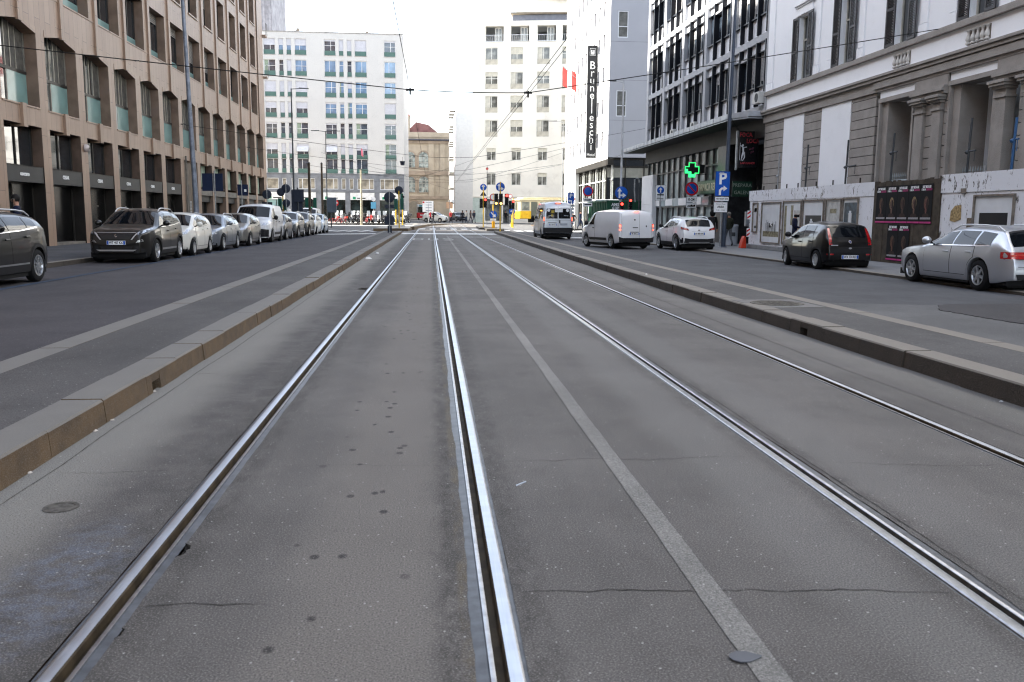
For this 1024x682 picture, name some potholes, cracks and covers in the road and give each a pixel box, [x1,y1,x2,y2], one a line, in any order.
manhole cover [42,501,80,513]
manhole cover [733,299,823,308]
